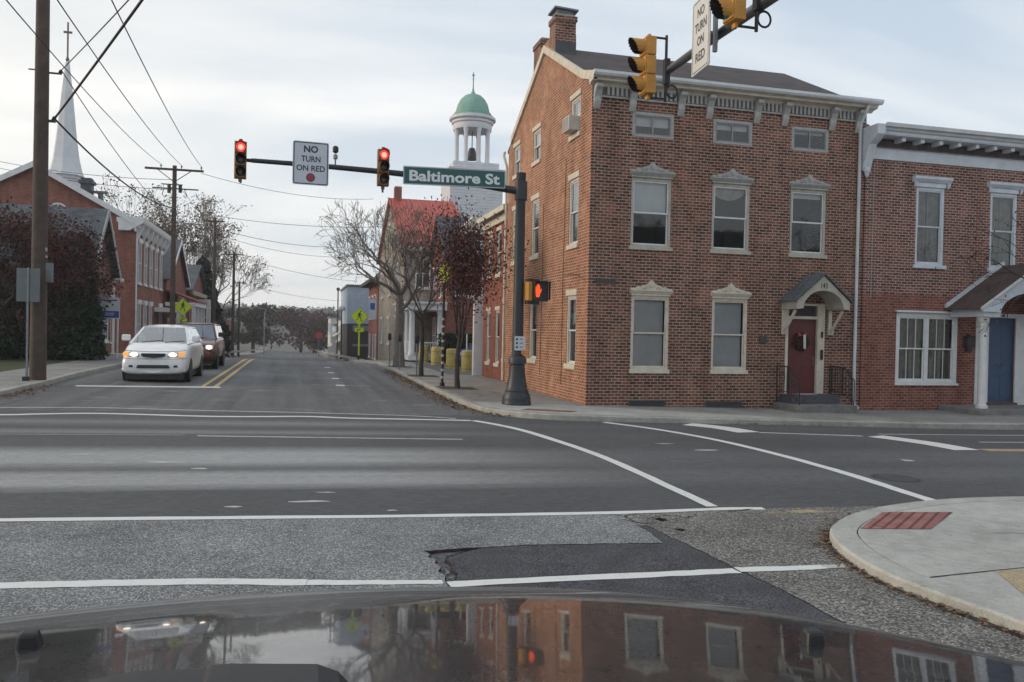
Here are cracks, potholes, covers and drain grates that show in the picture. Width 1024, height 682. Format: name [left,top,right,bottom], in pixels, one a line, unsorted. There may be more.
pothole [425,547,482,582]
manhole cover [870,474,922,482]
